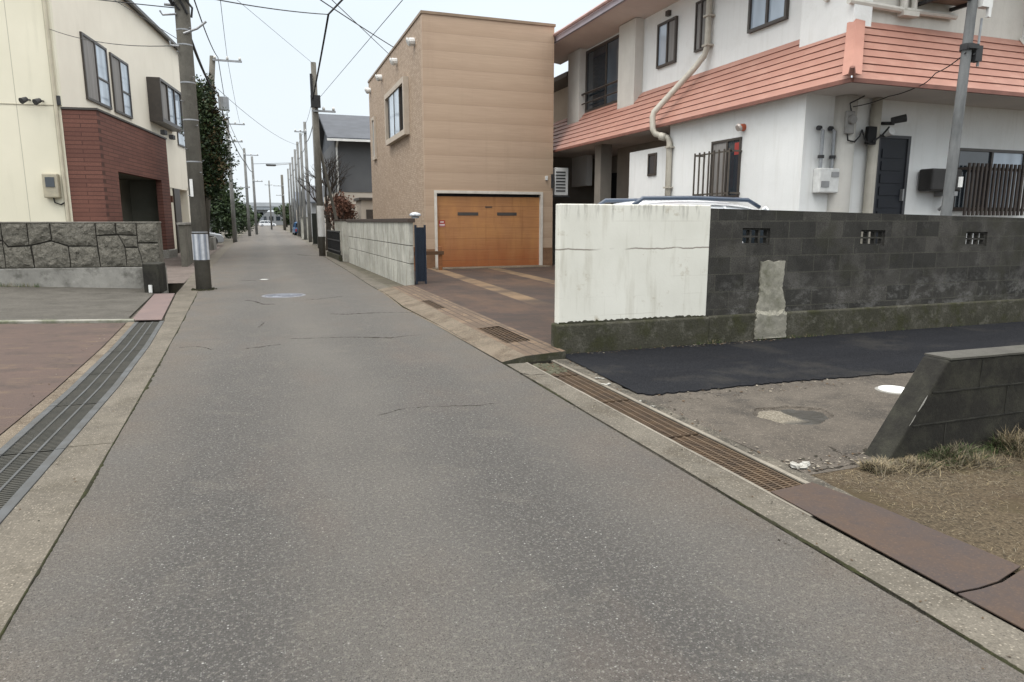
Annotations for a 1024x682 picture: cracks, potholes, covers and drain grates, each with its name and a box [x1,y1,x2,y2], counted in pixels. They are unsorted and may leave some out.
crack [245,336,402,349]
drain grate [107,333,157,352]
drain grate [84,350,146,375]
utility cover [875,385,905,394]
drain grate [49,371,130,407]
drain grate [123,321,164,336]
drain grate [605,400,698,439]
drain grate [0,402,105,456]
drain grate [0,449,65,524]
drain grate [672,434,802,495]
drain grate [477,327,529,343]
